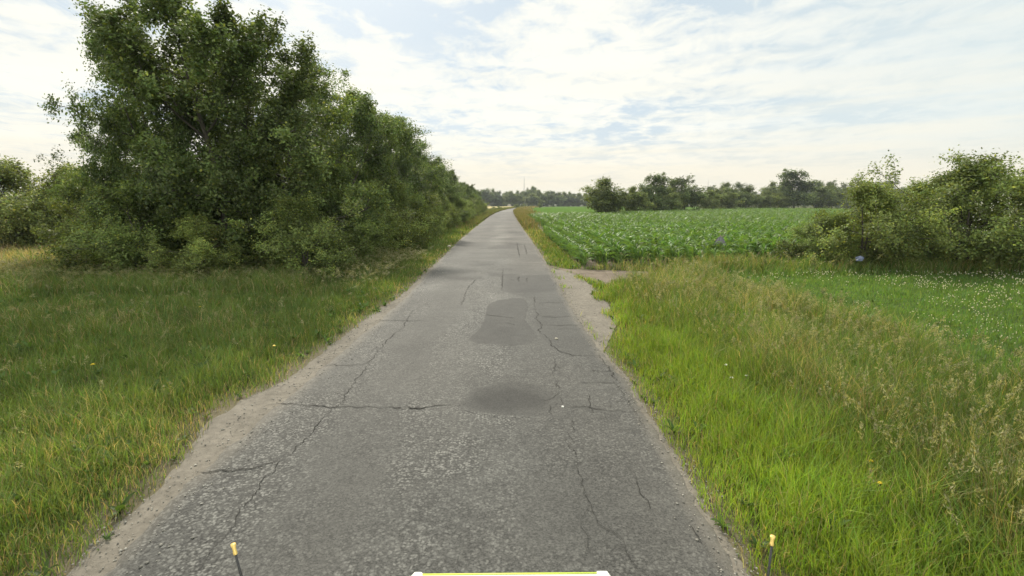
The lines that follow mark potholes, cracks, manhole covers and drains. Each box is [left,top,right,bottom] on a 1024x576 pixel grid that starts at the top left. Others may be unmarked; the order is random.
crack [570,422,641,572]
crack [195,312,445,574]
crack [534,300,647,431]
